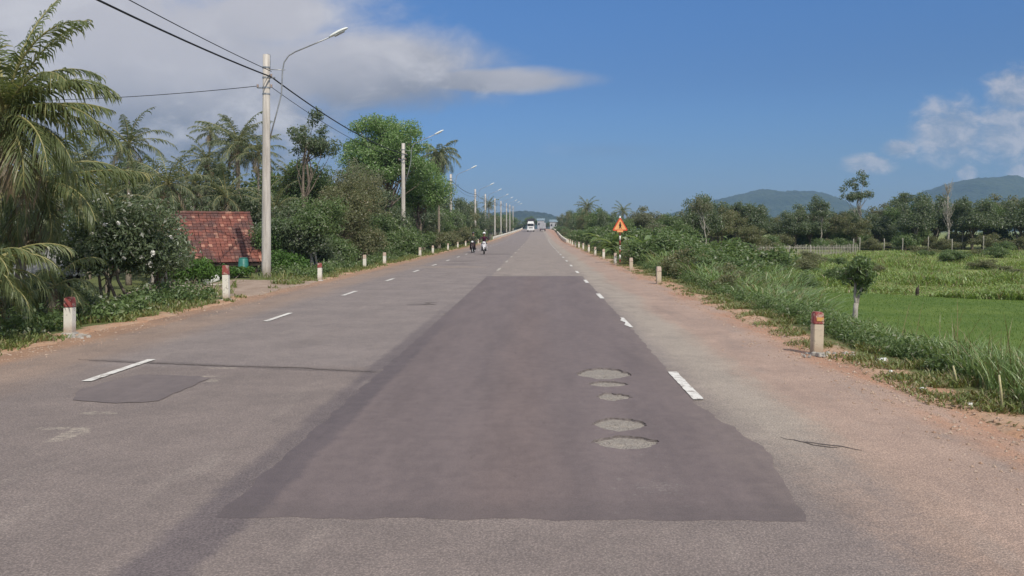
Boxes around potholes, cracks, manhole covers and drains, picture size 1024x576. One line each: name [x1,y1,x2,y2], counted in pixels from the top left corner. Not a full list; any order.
pothole [597,393,632,401]
pothole [592,418,647,432]
pothole [576,368,633,379]
pothole [592,435,659,449]
crack [781,437,858,450]
